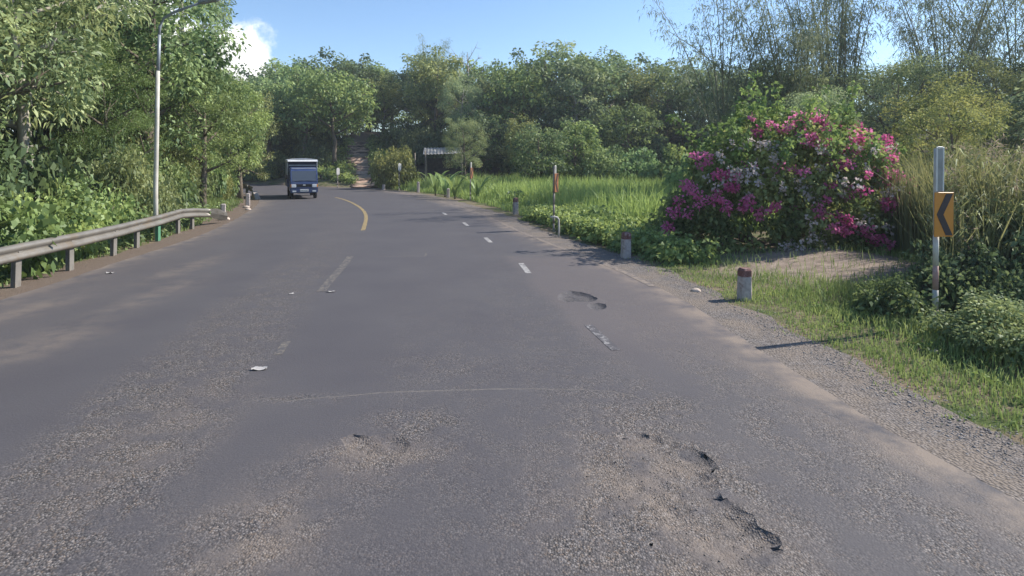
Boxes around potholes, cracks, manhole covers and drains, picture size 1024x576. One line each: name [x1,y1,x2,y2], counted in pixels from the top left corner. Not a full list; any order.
crack [247,388,663,408]
pothole [558,290,598,302]
pothole [584,431,783,576]
pothole [341,433,411,457]
